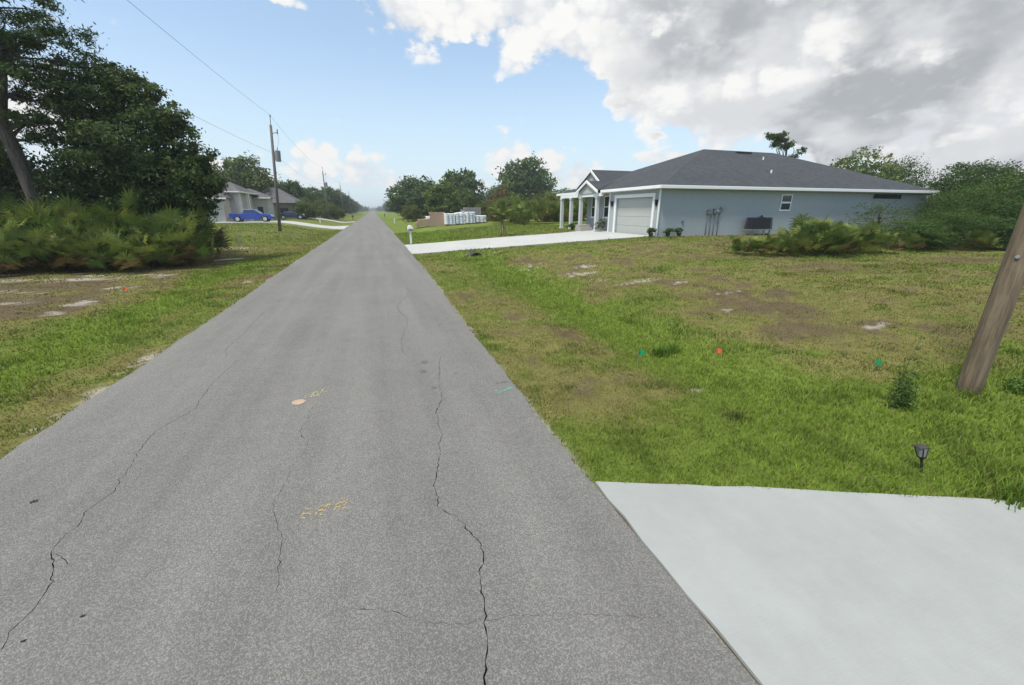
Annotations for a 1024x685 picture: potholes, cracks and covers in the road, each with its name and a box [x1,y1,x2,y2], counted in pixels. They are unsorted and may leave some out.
crack [1,313,263,651]
crack [350,357,665,685]
crack [271,419,309,590]
